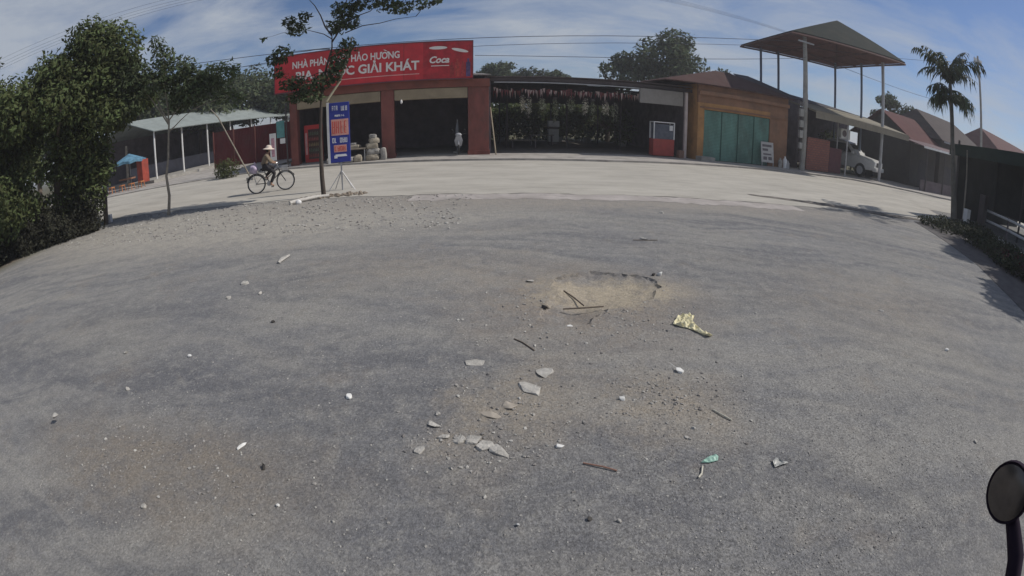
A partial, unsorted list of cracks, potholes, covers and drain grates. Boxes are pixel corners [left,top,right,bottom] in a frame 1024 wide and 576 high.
pothole [535,271,662,328]
